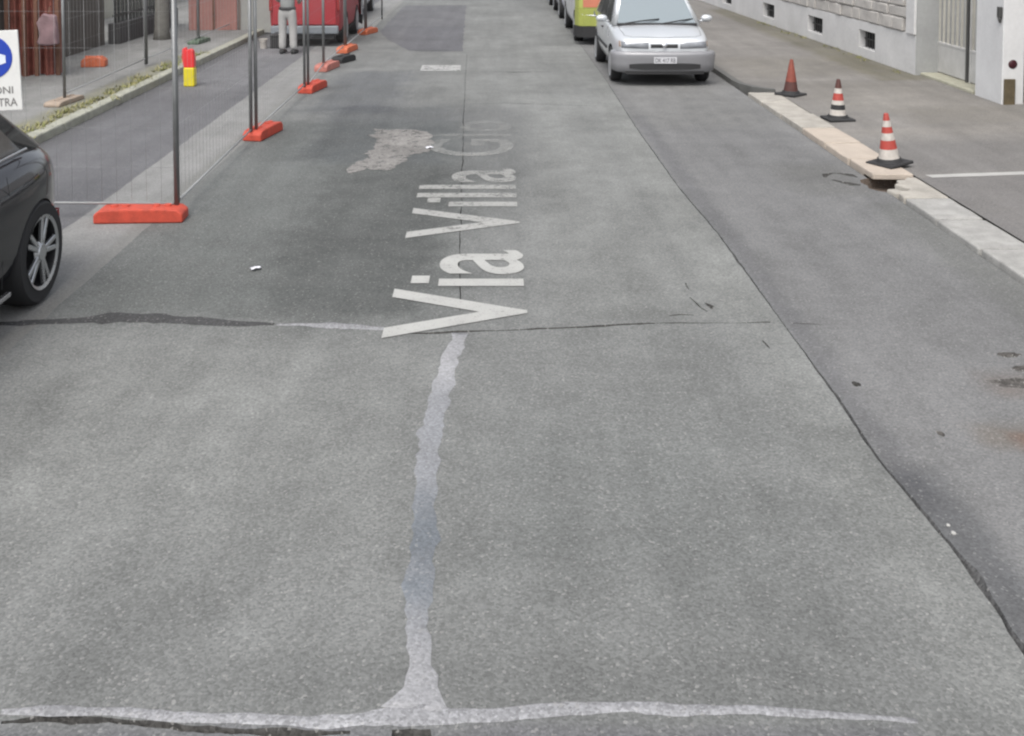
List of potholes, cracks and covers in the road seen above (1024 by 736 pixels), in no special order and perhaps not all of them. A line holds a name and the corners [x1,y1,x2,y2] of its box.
pothole [860,178,905,192]
crack [0,283,821,334]
